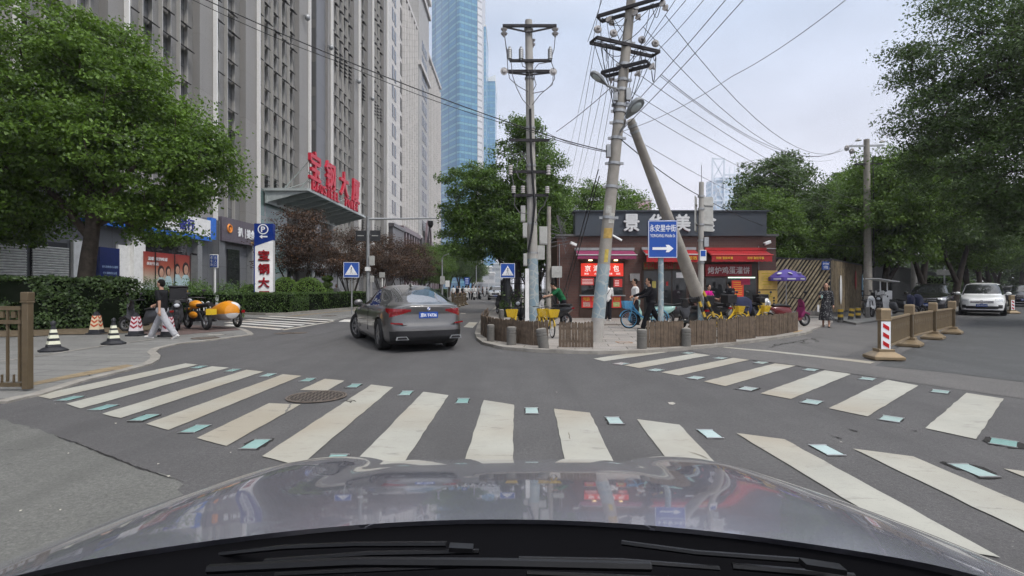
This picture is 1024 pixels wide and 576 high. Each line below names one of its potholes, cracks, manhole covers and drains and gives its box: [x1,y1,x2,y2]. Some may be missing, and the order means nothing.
manhole cover [285,390,347,403]
